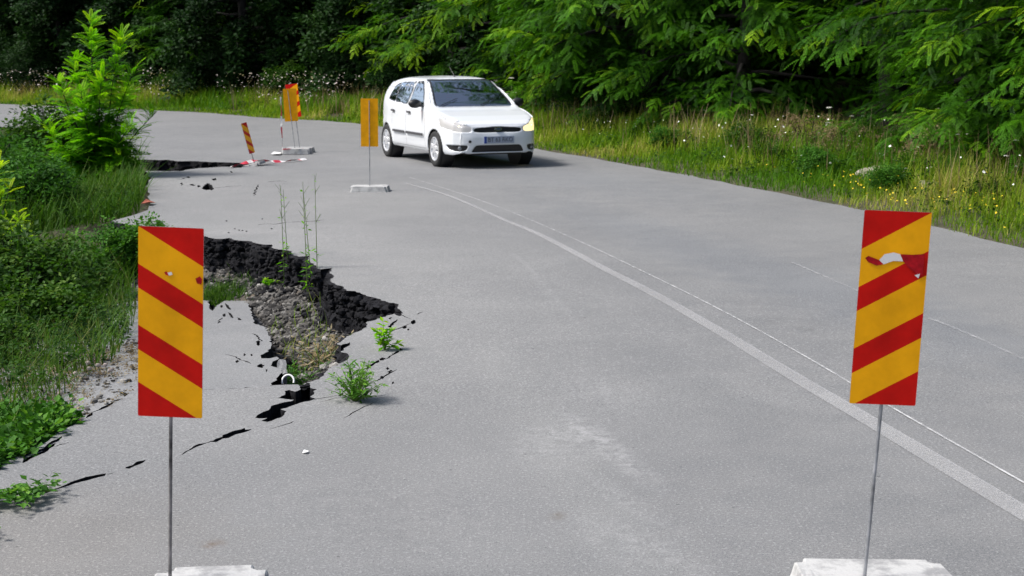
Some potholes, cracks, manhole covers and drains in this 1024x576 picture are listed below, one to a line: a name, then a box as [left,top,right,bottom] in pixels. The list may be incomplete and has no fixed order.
crack [23,436,66,463]
crack [33,460,145,498]
crack [183,312,421,454]
